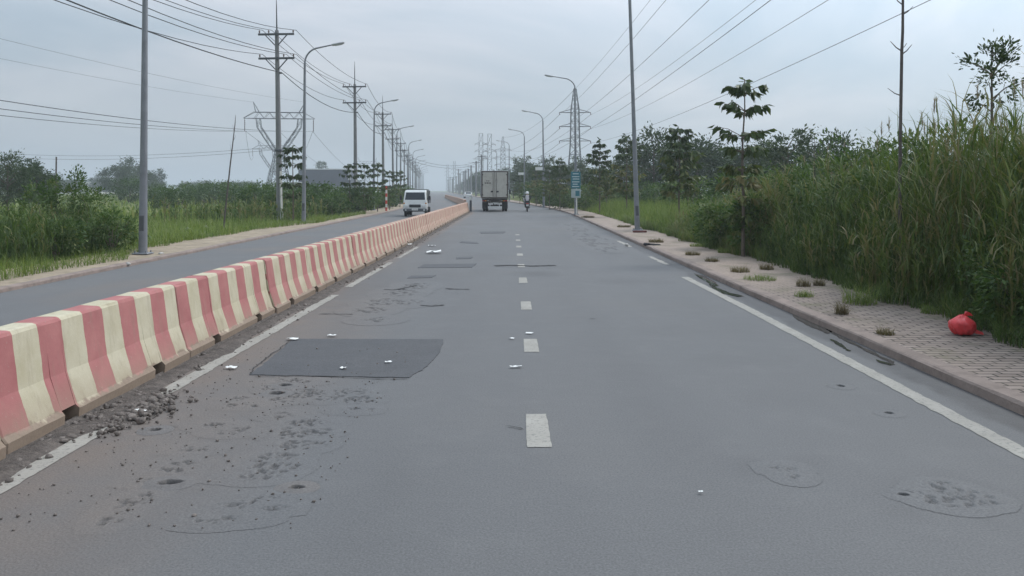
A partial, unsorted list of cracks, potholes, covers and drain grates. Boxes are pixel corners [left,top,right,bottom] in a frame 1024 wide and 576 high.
crack [71,341,408,535]
